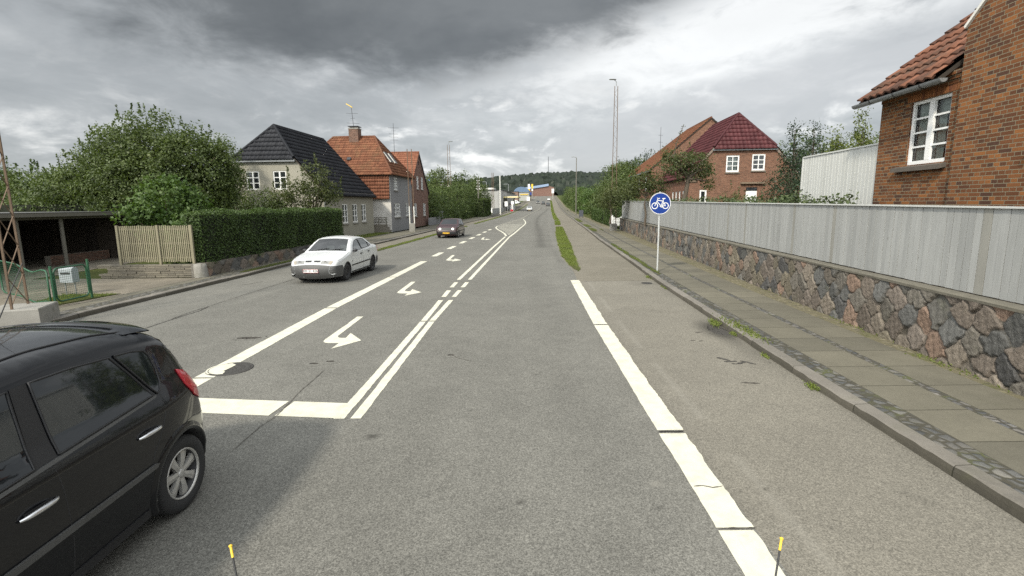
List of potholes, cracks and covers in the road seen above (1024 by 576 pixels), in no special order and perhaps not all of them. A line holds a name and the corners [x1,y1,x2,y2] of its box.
manhole cover [205,362,254,376]
